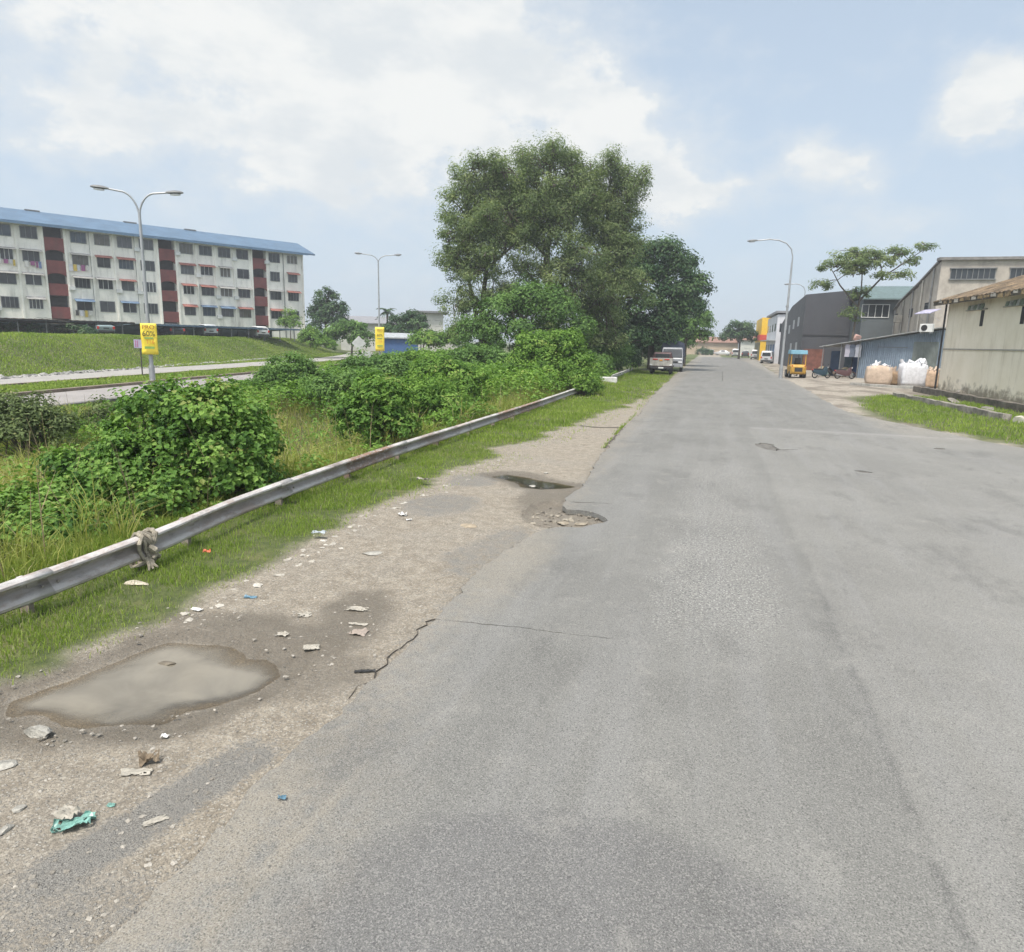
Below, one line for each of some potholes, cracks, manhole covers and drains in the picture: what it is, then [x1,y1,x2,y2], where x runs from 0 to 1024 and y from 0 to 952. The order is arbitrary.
pothole [484,472,581,490]
crack [349,618,435,698]
pothole [520,500,604,528]
pothole [0,627,304,744]
